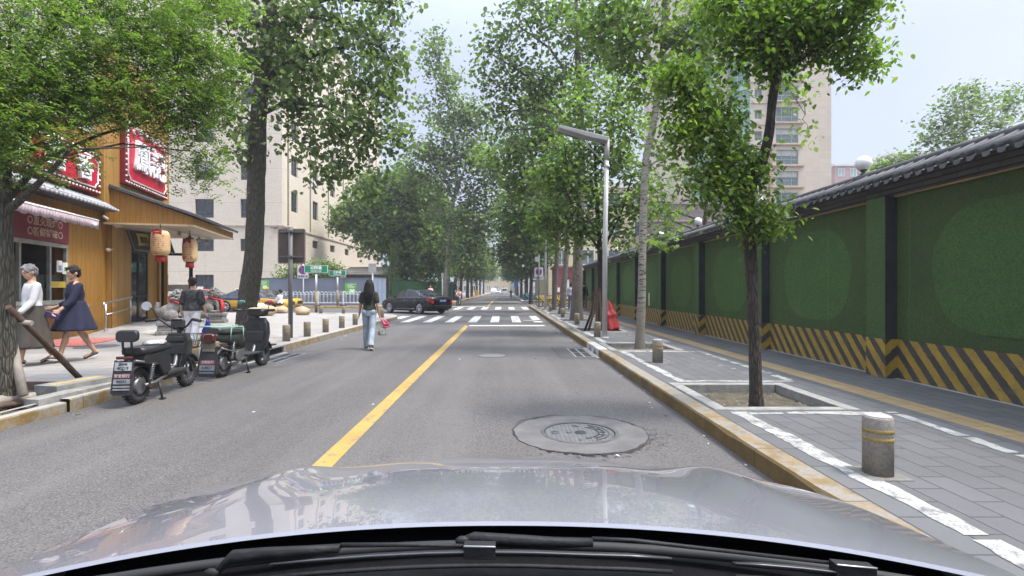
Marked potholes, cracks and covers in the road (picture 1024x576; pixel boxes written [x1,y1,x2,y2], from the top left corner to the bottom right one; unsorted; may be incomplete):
drain grate [245,352,306,364]
drain grate [567,347,600,358]
manhole cover [513,416,648,457]
